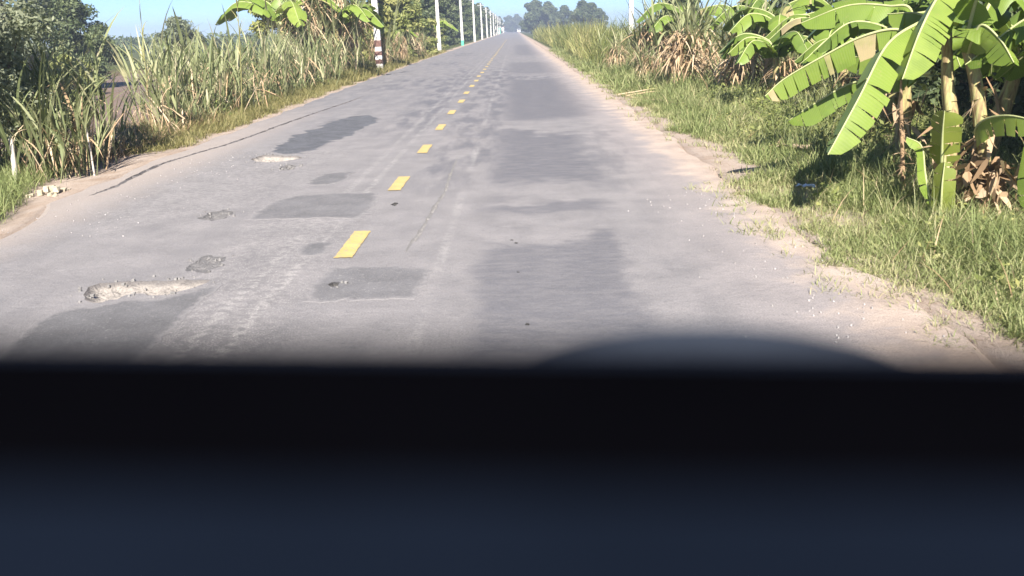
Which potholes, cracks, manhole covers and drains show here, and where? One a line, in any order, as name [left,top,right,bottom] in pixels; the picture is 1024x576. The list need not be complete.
crack [406,159,457,252]
pothole [198,208,245,221]
pothole [71,275,215,303]
pothole [246,153,306,163]
pothole [185,255,234,273]
crack [92,96,363,195]
